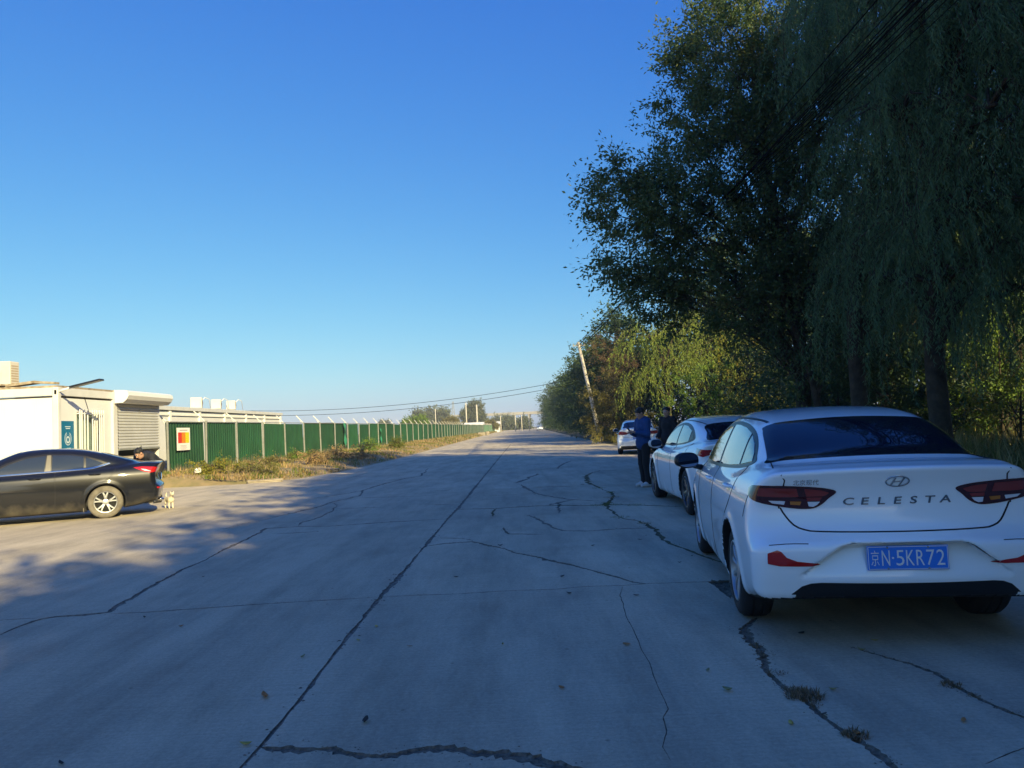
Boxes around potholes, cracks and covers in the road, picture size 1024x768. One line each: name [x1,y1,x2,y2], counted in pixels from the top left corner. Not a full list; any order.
crack [729,618,1024,768]
crack [381,461,729,759]
crack [256,743,583,768]
crack [0,468,447,635]
